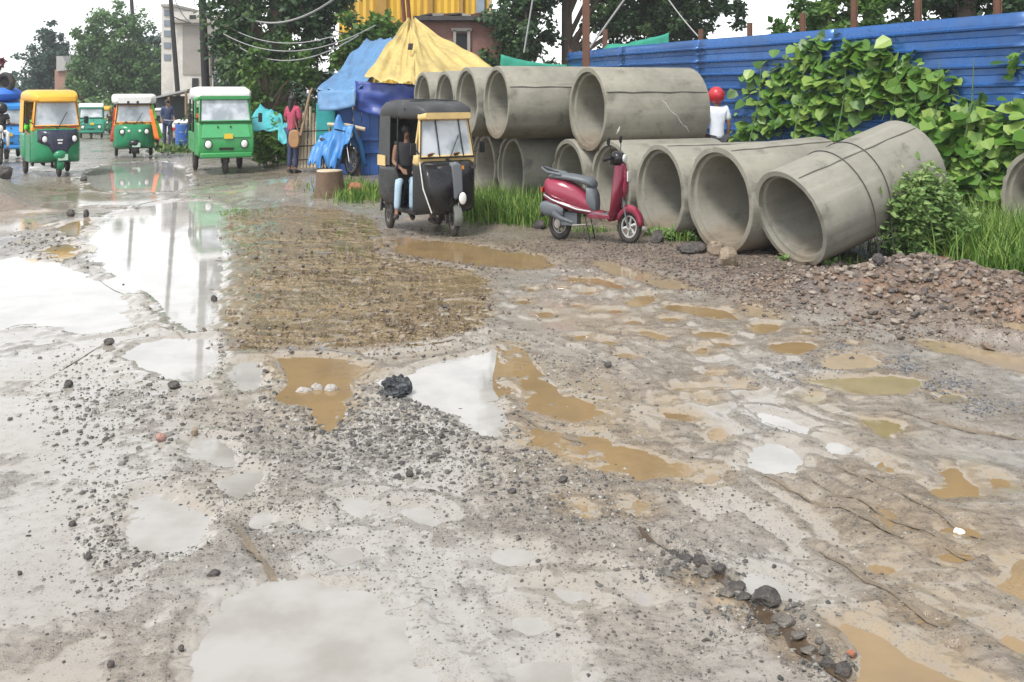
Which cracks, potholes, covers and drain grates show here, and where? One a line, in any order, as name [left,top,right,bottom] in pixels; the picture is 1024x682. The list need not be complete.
pothole [526,427,670,480]
pothole [808,376,921,394]
pothole [384,237,555,270]
pothole [838,623,962,682]
pothole [275,357,377,431]
pothole [930,468,1010,498]
pothole [493,345,604,427]
